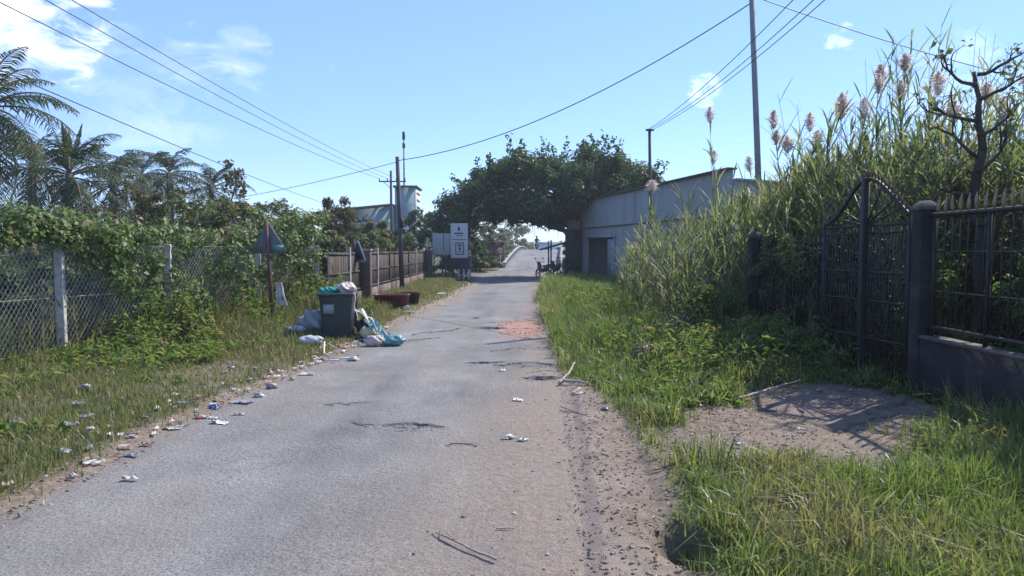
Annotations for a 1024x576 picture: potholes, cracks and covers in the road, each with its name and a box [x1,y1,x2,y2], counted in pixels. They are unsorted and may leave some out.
crack [405,328,461,342]
pothole [372,422,456,432]
